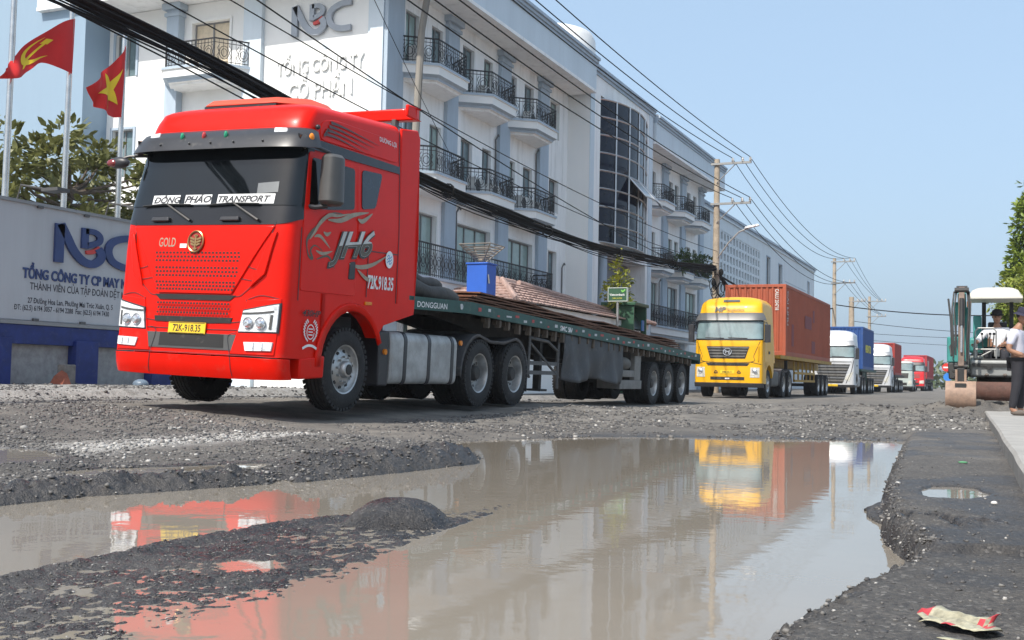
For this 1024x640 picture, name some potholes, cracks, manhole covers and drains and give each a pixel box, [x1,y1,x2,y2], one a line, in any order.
pothole [0,434,932,640]
pothole [916,483,998,499]
